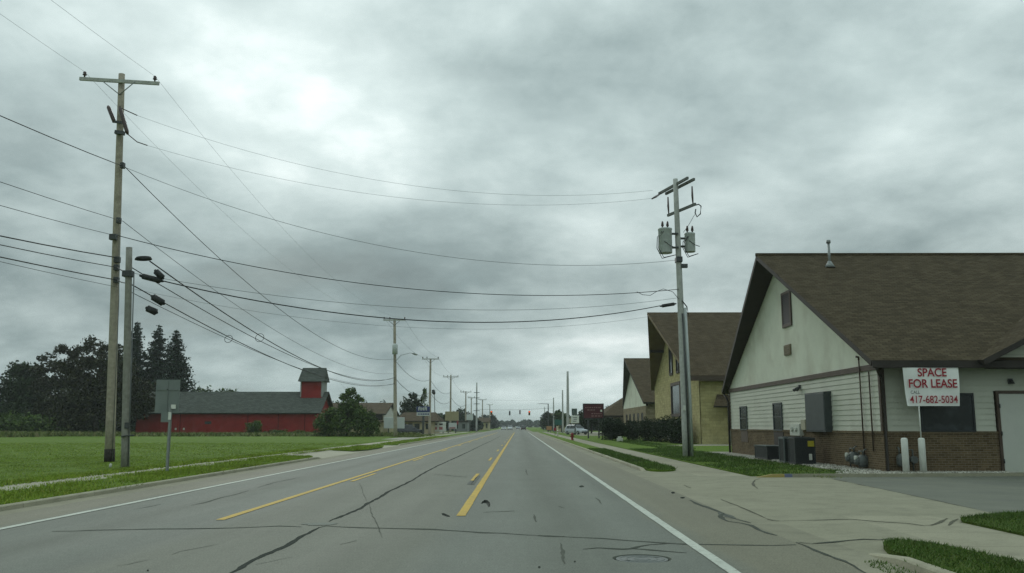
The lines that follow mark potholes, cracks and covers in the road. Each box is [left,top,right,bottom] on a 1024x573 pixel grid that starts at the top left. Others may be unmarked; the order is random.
crack [322,478,957,563]
manhole cover [612,554,672,563]
